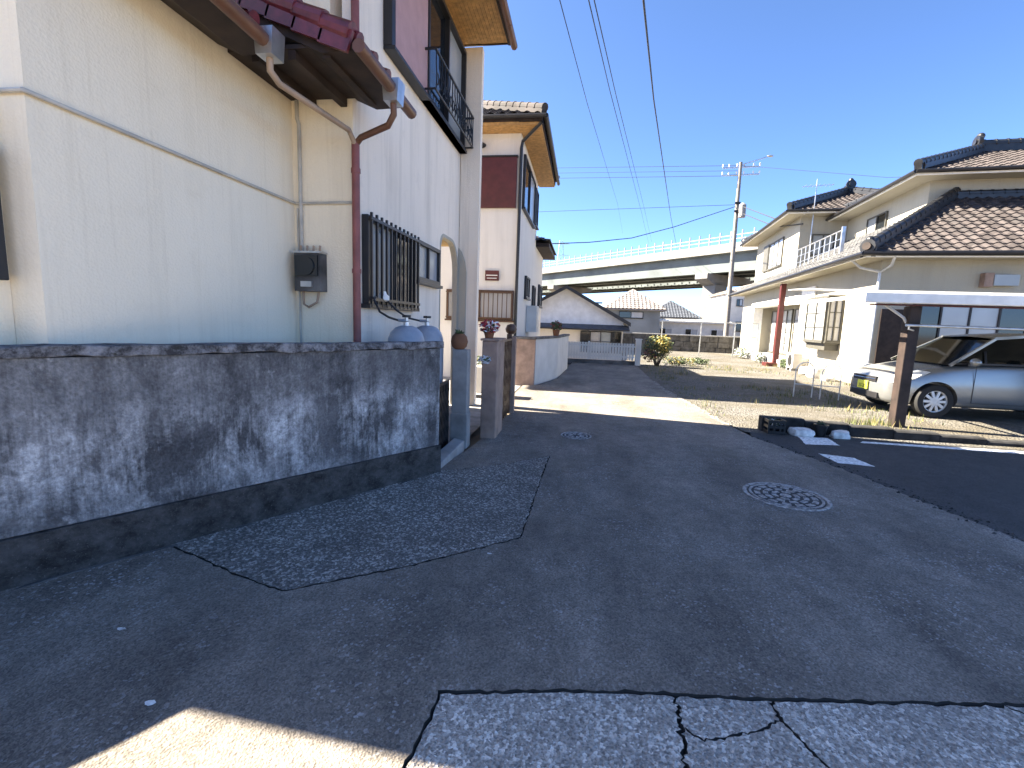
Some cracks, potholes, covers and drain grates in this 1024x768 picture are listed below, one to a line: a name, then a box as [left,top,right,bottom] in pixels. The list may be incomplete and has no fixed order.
crack [402,688,1024,768]
manhole cover [742,482,833,511]
